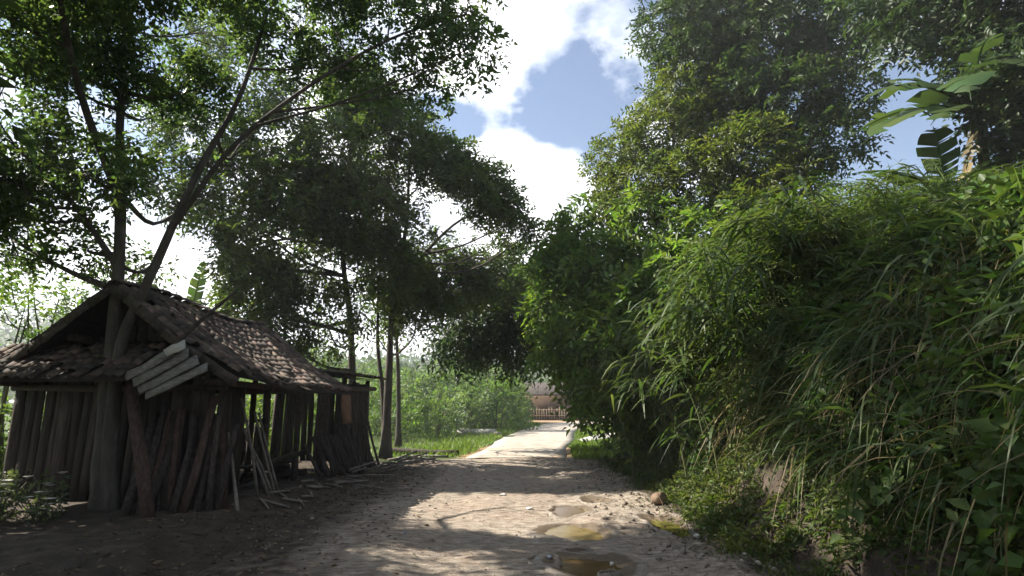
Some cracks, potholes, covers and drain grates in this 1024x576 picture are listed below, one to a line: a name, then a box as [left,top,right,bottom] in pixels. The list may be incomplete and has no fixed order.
pothole [531,550,649,576]
pothole [522,521,621,543]
pothole [545,504,599,519]
pothole [577,495,617,505]
